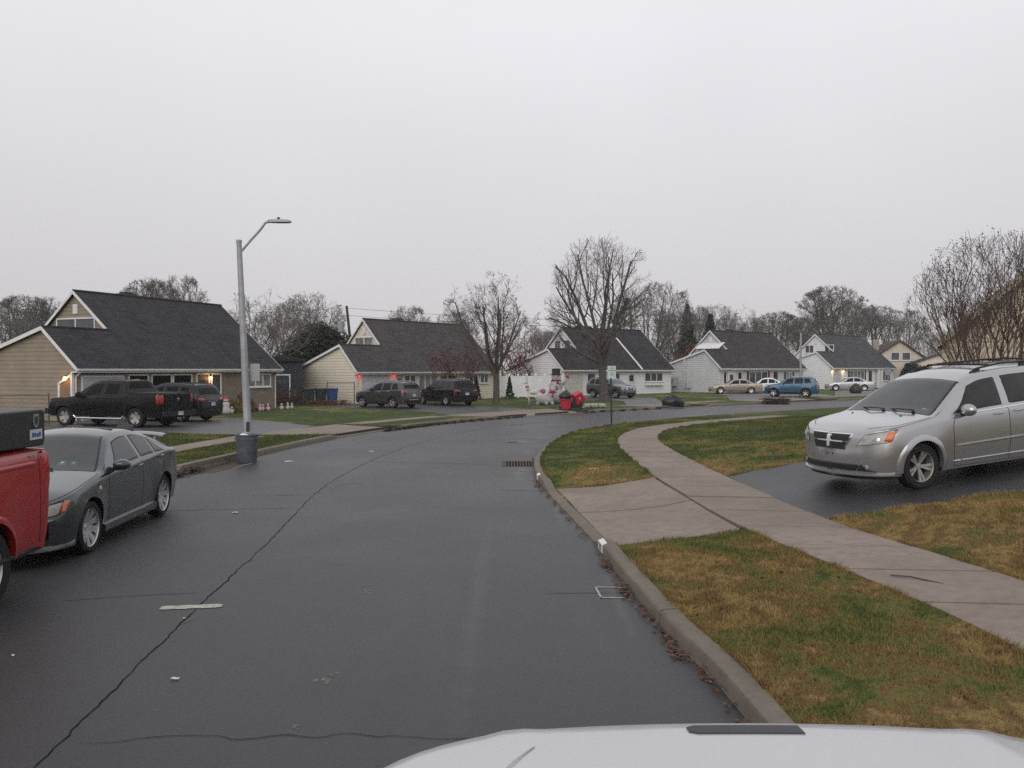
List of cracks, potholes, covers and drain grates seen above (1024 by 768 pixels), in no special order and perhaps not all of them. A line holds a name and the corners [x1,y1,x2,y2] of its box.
drain grate [501,457,534,467]
crack [99,733,464,743]
